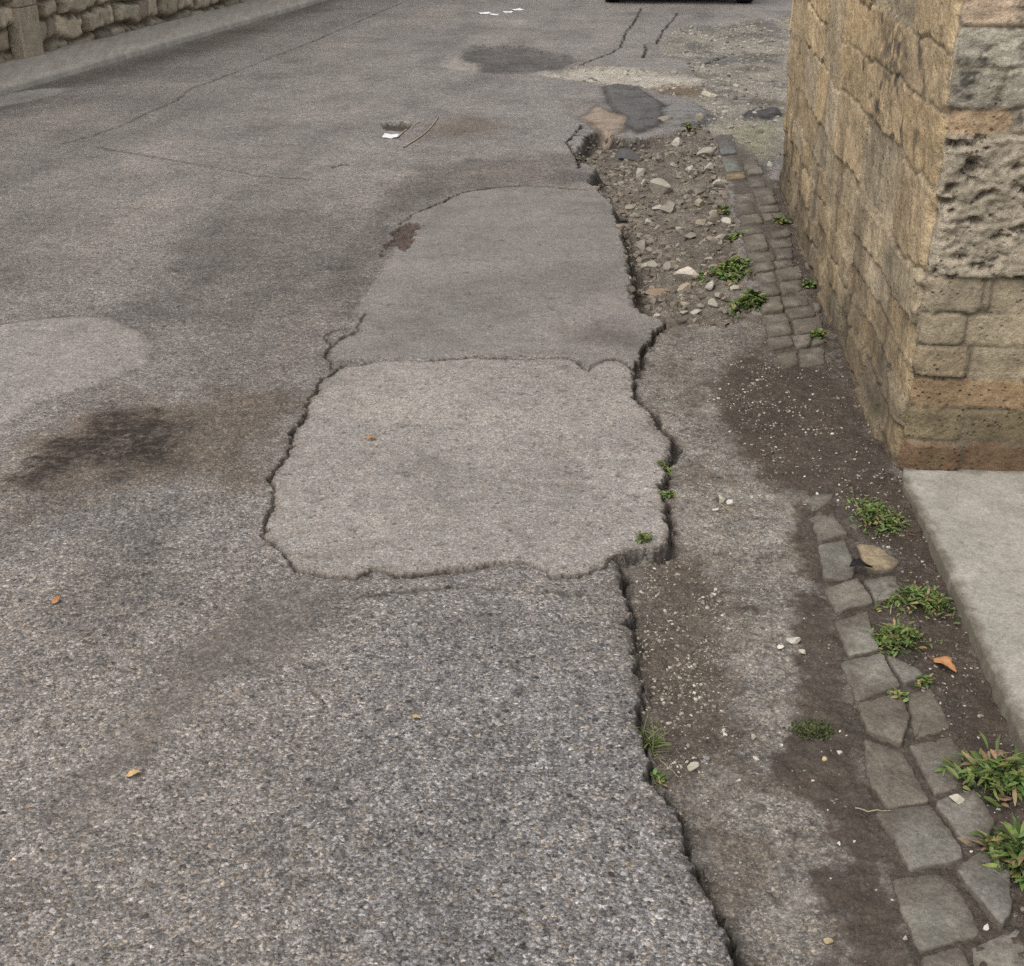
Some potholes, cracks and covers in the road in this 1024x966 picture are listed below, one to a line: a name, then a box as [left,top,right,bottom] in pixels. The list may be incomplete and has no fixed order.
crack [579,8,726,66]
crack [97,146,311,180]
crack [563,125,584,168]
pothole [381,122,416,131]
